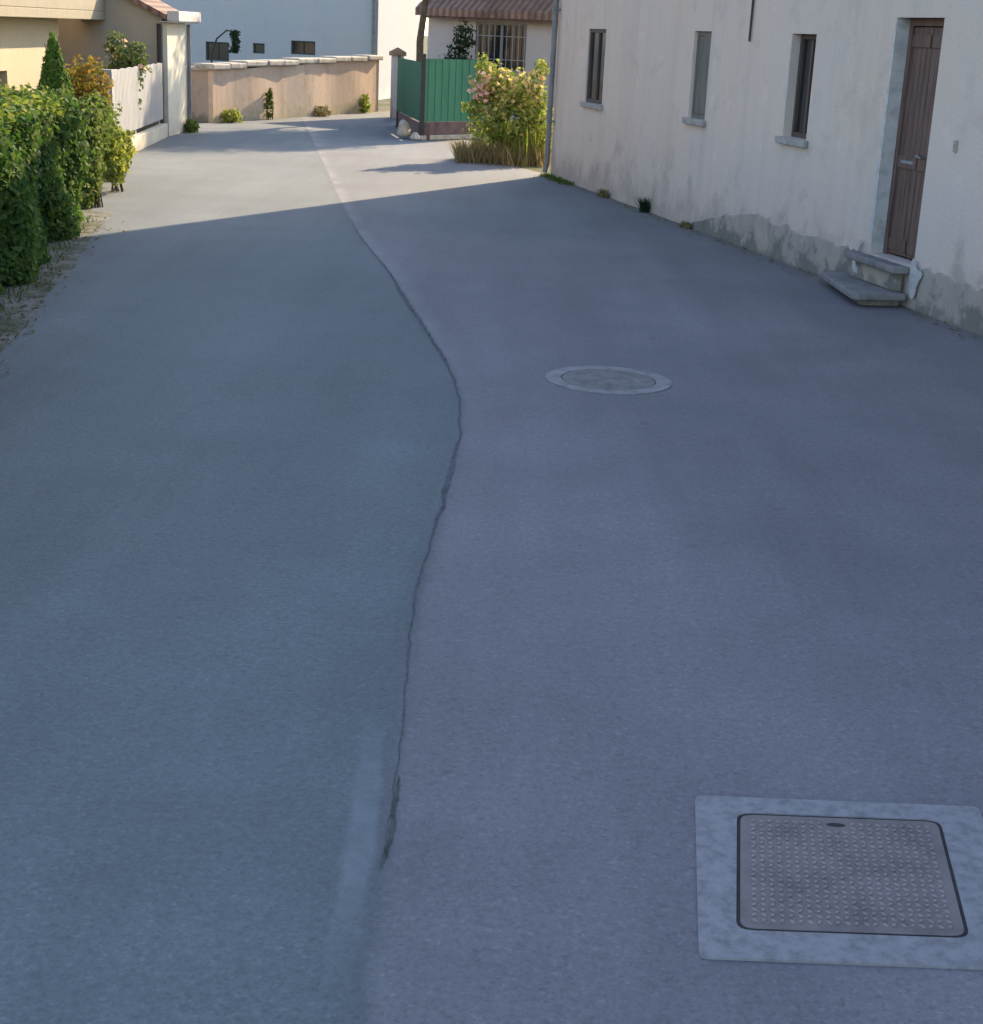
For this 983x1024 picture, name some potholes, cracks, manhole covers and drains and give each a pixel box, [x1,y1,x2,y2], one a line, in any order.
manhole cover [695,795,983,970]
manhole cover [545,366,672,395]
